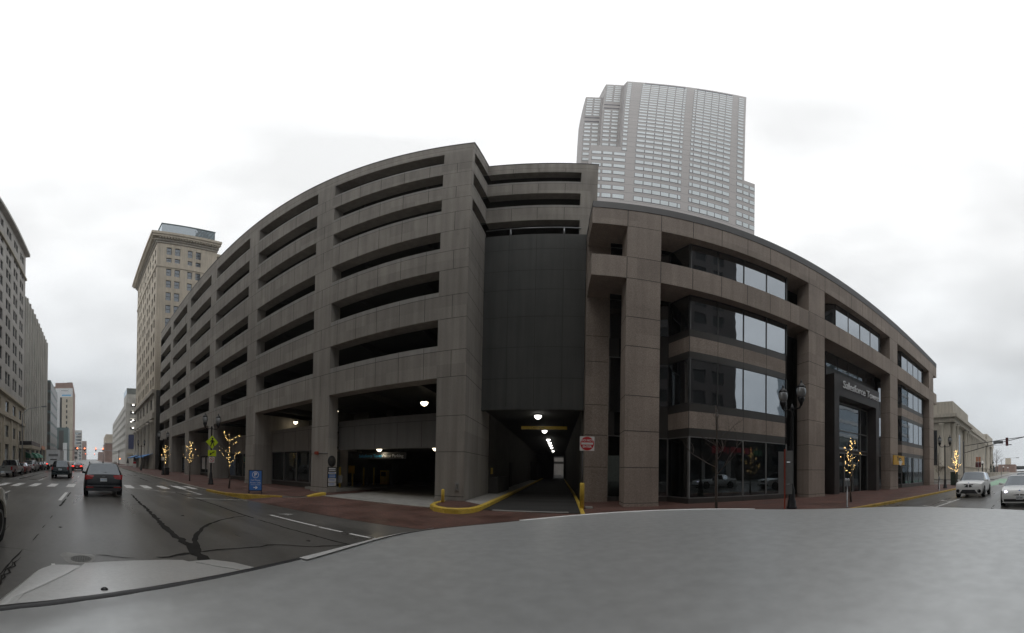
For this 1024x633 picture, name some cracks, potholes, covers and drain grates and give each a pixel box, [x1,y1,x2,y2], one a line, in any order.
manhole cover [60,552,95,564]
